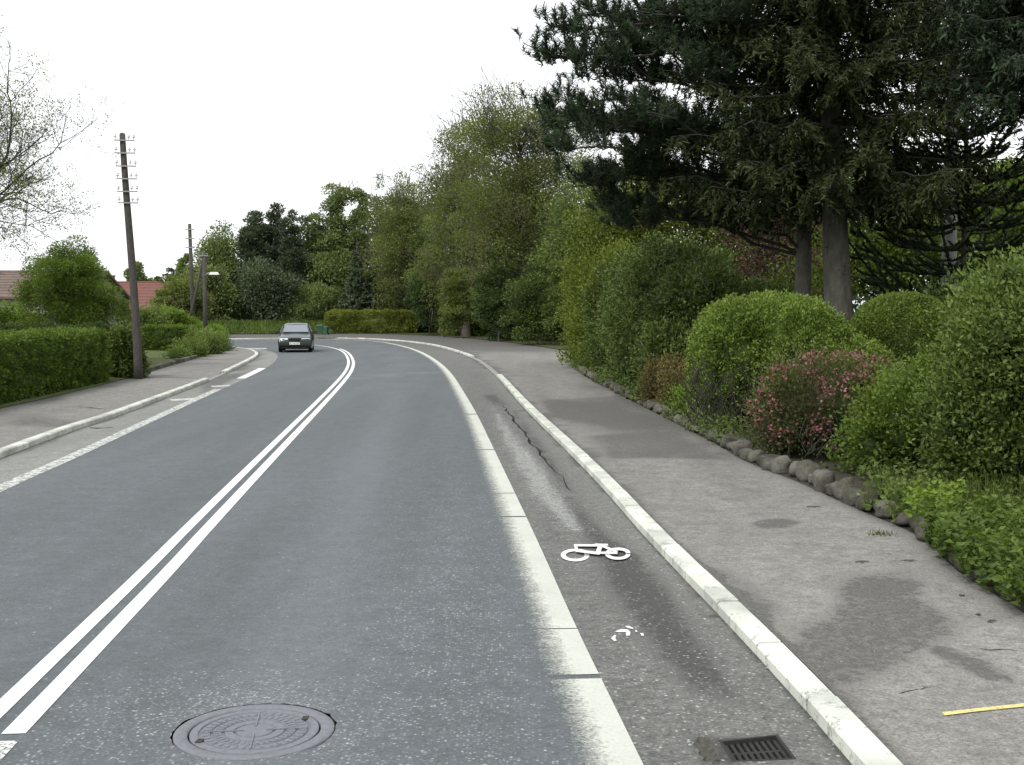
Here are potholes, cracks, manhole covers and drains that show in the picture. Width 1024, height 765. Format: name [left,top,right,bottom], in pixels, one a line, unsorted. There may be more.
drain grate [719,734,796,762]
crack [503,406,570,490]
manhole cover [170,704,337,760]
